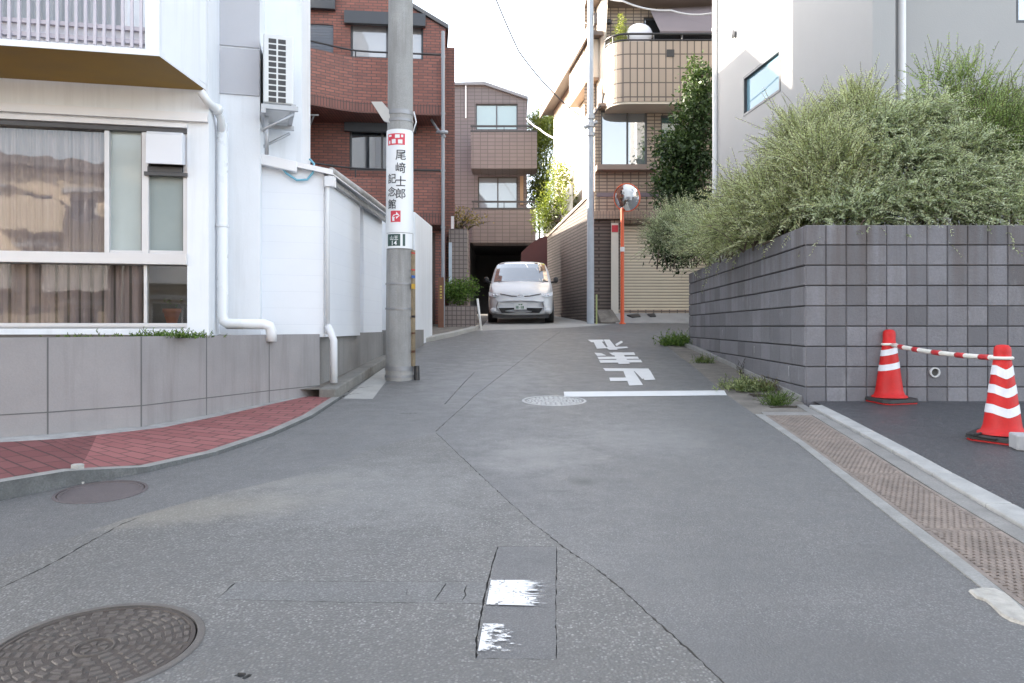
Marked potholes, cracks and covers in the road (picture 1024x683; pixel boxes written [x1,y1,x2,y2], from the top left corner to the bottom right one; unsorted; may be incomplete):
drain grate [926,530,1024,607]
manhole cover [51,480,149,504]
drain grate [766,415,852,440]
drain grate [850,475,1000,531]
drain grate [802,439,907,475]
crack [1,518,136,588]
manhole cover [522,396,586,406]
manhole cover [0,603,206,683]
